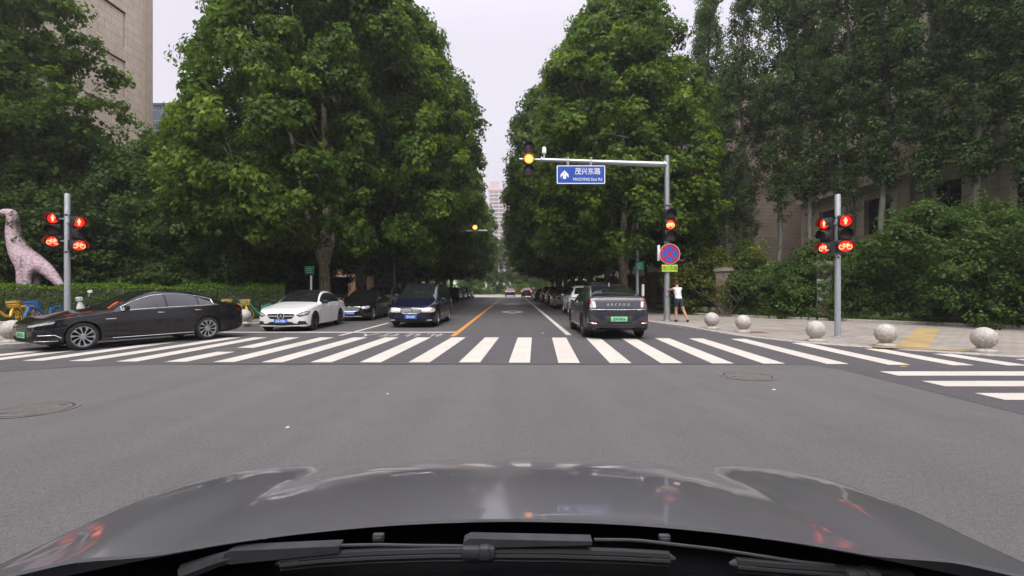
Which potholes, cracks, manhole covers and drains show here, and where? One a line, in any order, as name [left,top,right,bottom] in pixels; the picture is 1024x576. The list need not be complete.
manhole cover [0,401,82,419]
manhole cover [719,371,778,381]
